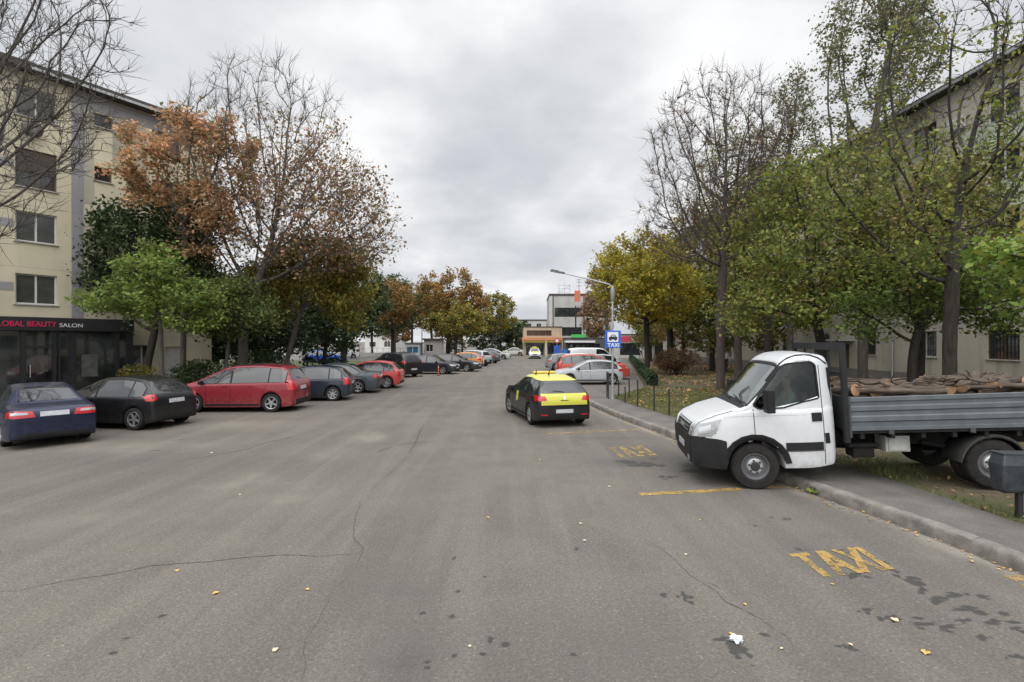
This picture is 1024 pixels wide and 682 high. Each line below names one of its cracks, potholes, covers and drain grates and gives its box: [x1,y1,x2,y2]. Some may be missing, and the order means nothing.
crack [642,537,796,653]
crack [23,479,384,680]
